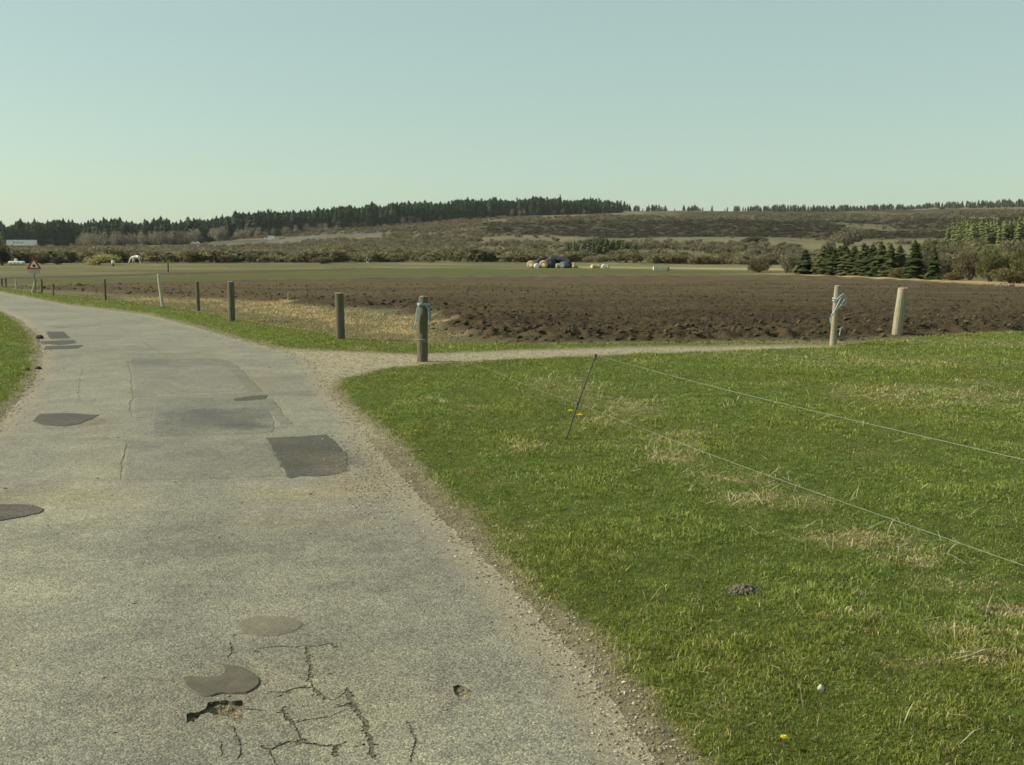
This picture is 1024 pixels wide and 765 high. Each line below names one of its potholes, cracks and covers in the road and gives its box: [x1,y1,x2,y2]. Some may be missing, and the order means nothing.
pothole [187,700,245,723]
pothole [453,685,472,697]
crack [220,643,379,765]
